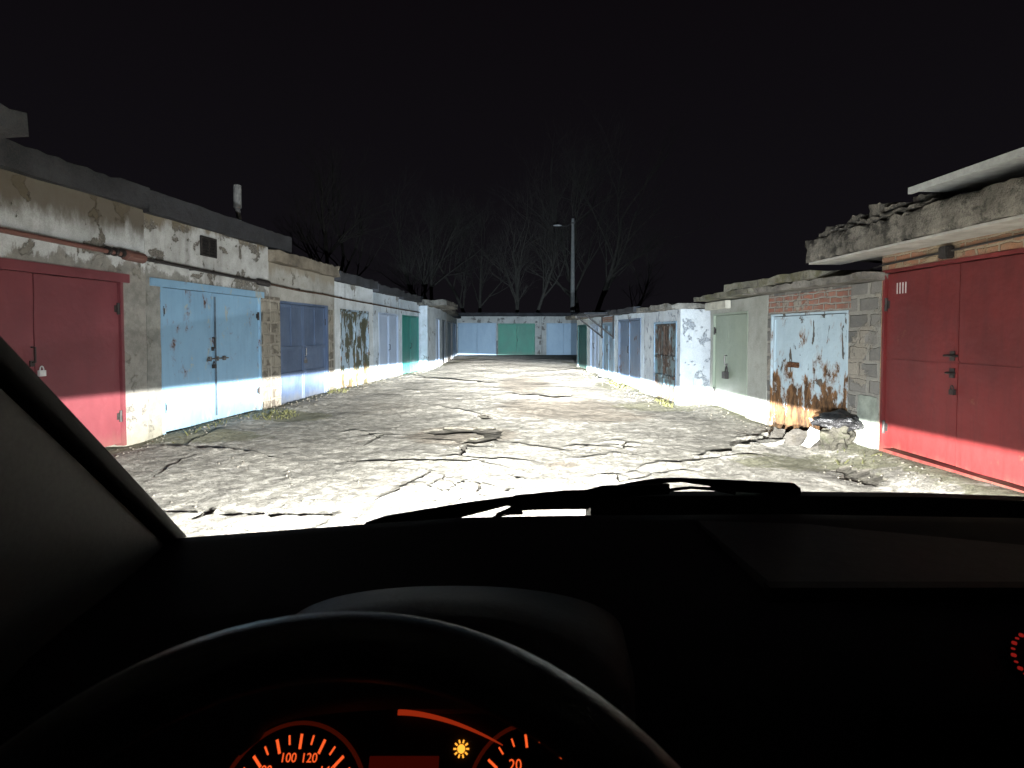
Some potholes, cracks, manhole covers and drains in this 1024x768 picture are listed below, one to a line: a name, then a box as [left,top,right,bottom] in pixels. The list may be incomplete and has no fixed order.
crack [202,442,539,521]
pothole [830,465,889,487]
pothole [421,427,503,444]
crack [616,430,789,482]
